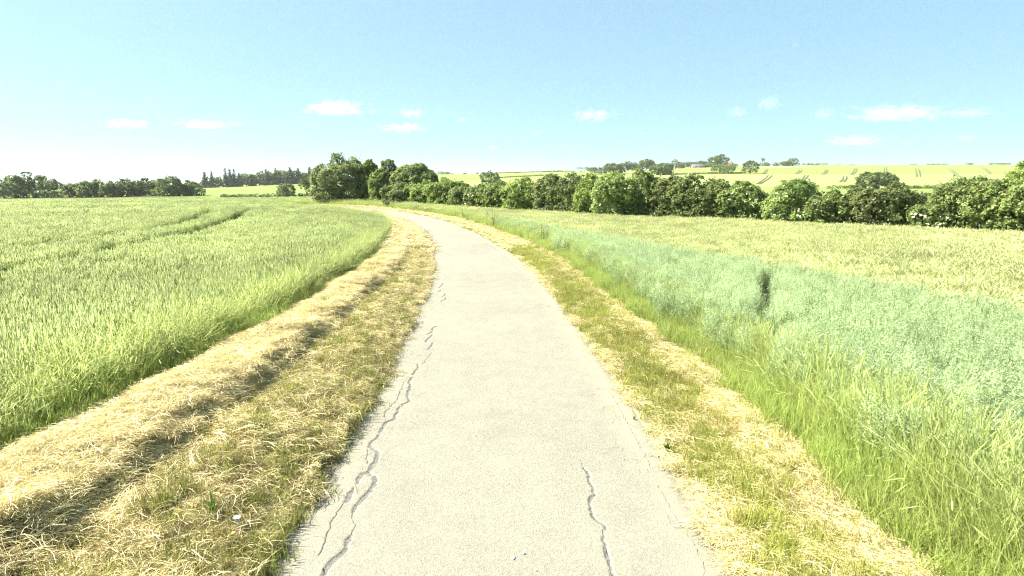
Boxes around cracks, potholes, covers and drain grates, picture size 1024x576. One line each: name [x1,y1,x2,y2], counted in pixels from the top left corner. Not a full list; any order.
crack [308,326,437,576]
crack [580,461,614,576]
